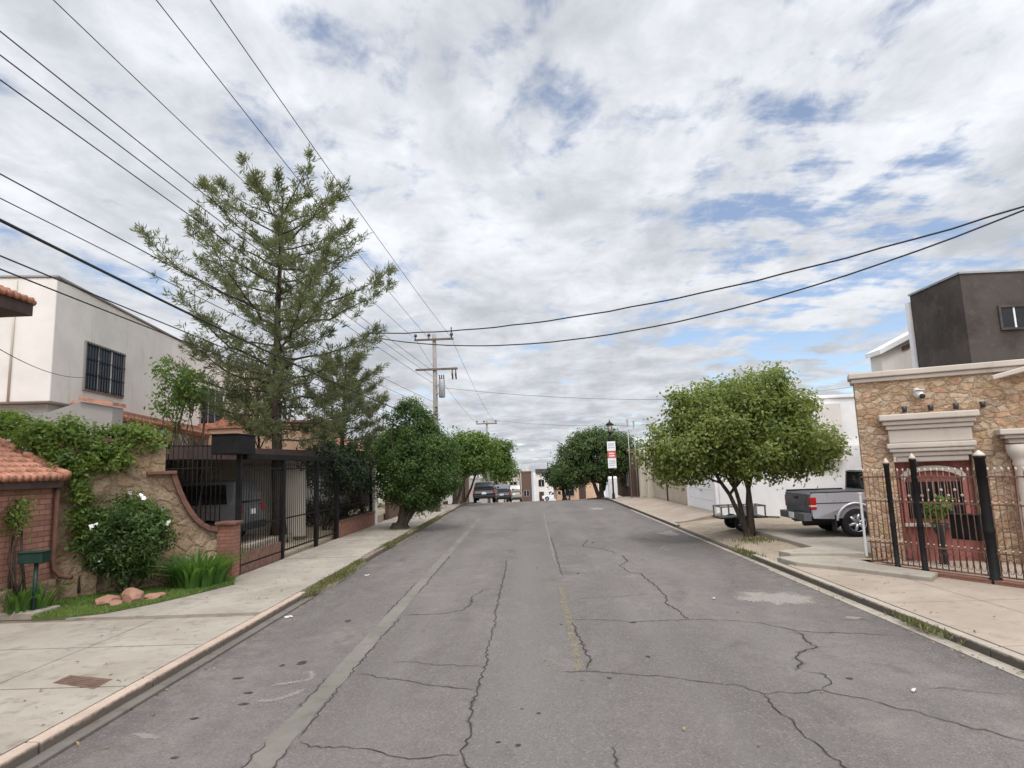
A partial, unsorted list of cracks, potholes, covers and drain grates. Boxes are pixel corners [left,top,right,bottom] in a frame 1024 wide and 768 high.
crack [241,557,507,768]
crack [561,540,1024,768]
